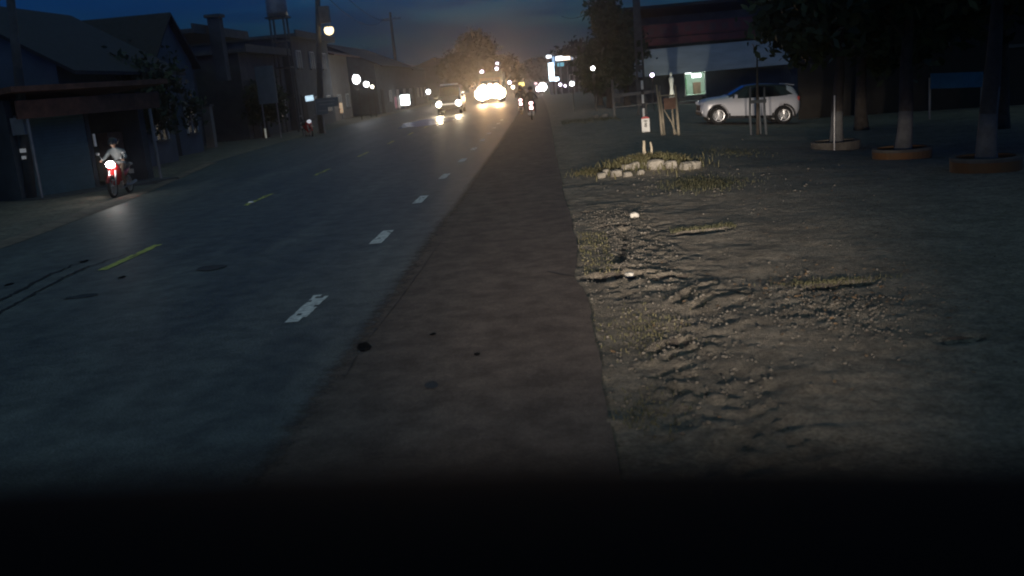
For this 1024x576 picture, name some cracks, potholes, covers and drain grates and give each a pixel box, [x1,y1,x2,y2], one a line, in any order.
pothole [940,336,987,345]
crack [0,253,128,313]
pothole [357,342,372,352]
